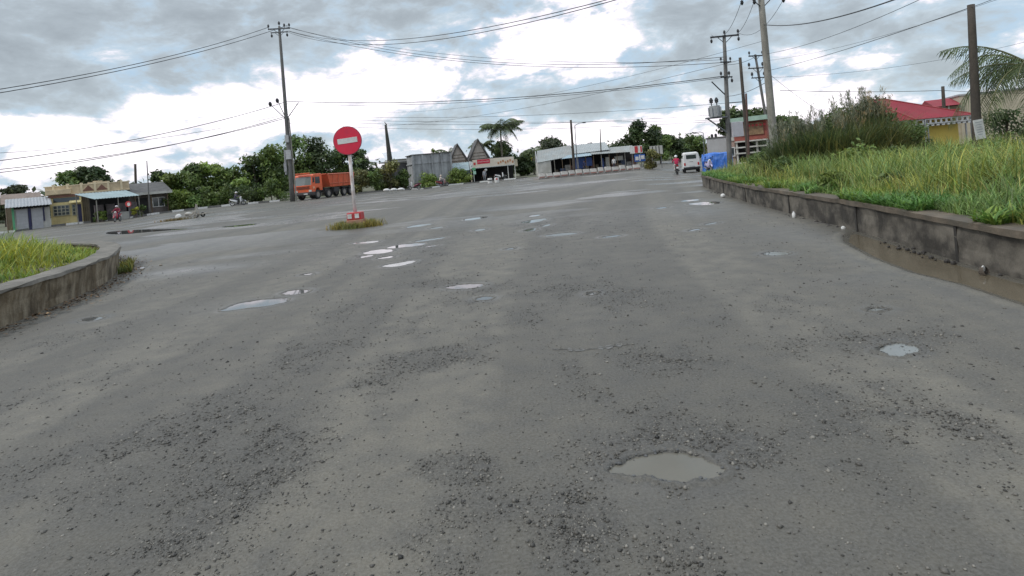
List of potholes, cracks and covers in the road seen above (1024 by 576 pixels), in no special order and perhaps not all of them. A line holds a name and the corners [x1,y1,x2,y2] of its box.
pothole [279,288,314,296]
pothole [217,297,291,312]
pothole [860,305,893,313]
pothole [380,260,419,268]
pothole [869,339,928,359]
pothole [100,226,200,236]
pothole [598,444,739,489]
